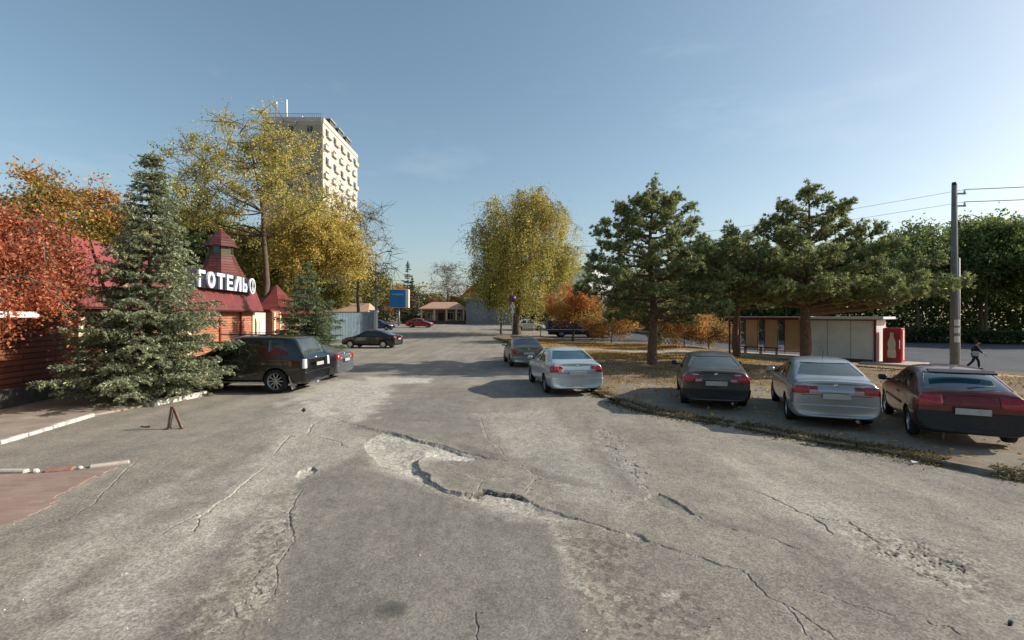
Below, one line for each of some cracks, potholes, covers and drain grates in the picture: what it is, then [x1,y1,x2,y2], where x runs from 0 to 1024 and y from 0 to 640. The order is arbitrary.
crack [37,460,137,527]
crack [585,491,898,640]
crack [161,415,658,639]
